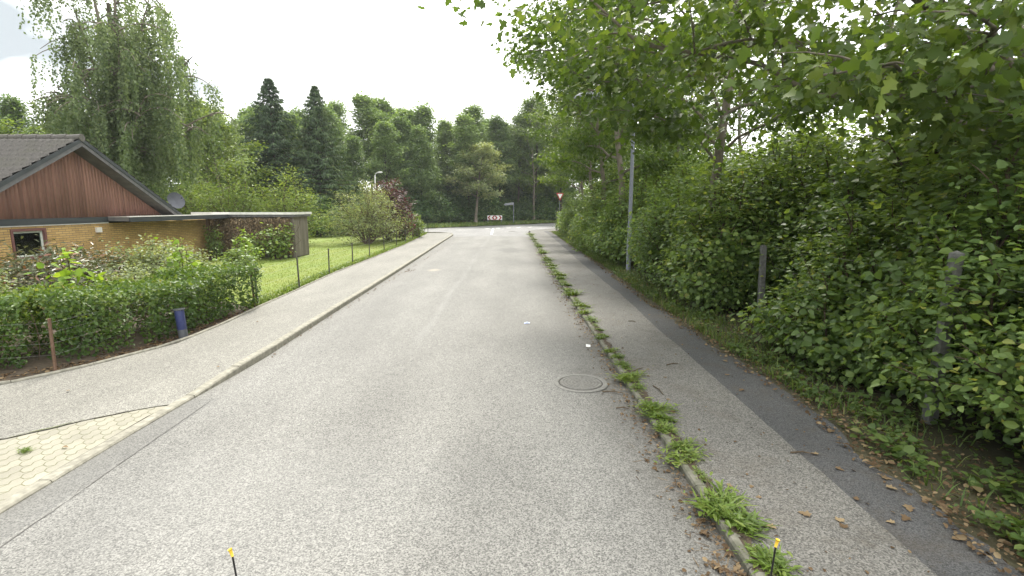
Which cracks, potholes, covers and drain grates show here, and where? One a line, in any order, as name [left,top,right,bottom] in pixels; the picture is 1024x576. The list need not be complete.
manhole cover [553,374,608,393]
